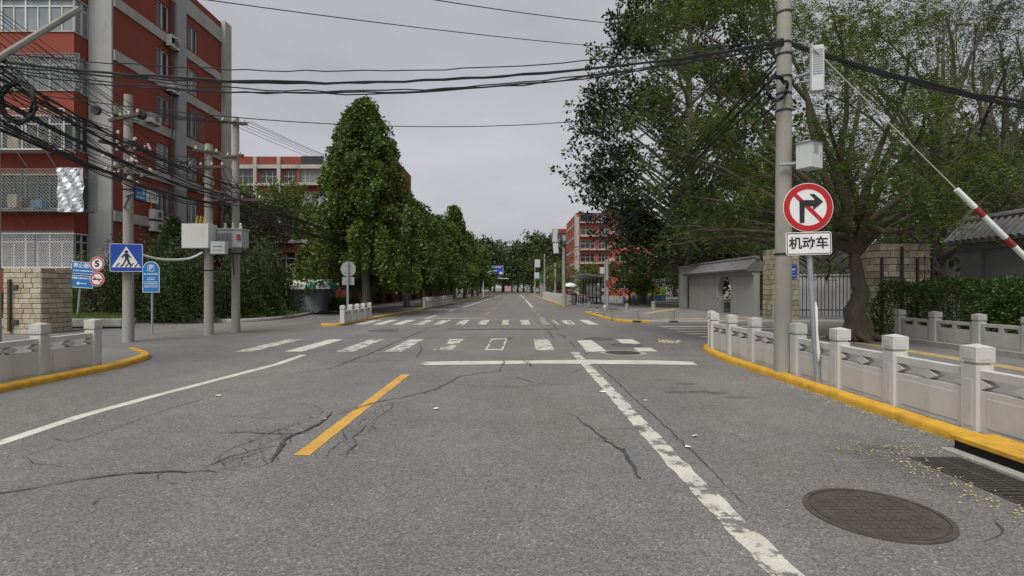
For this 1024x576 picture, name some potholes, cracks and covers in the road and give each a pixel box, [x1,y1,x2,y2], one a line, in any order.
crack [0,360,538,493]
drain grate [908,457,1024,507]
manhole cover [803,488,960,545]
crack [548,323,747,505]
